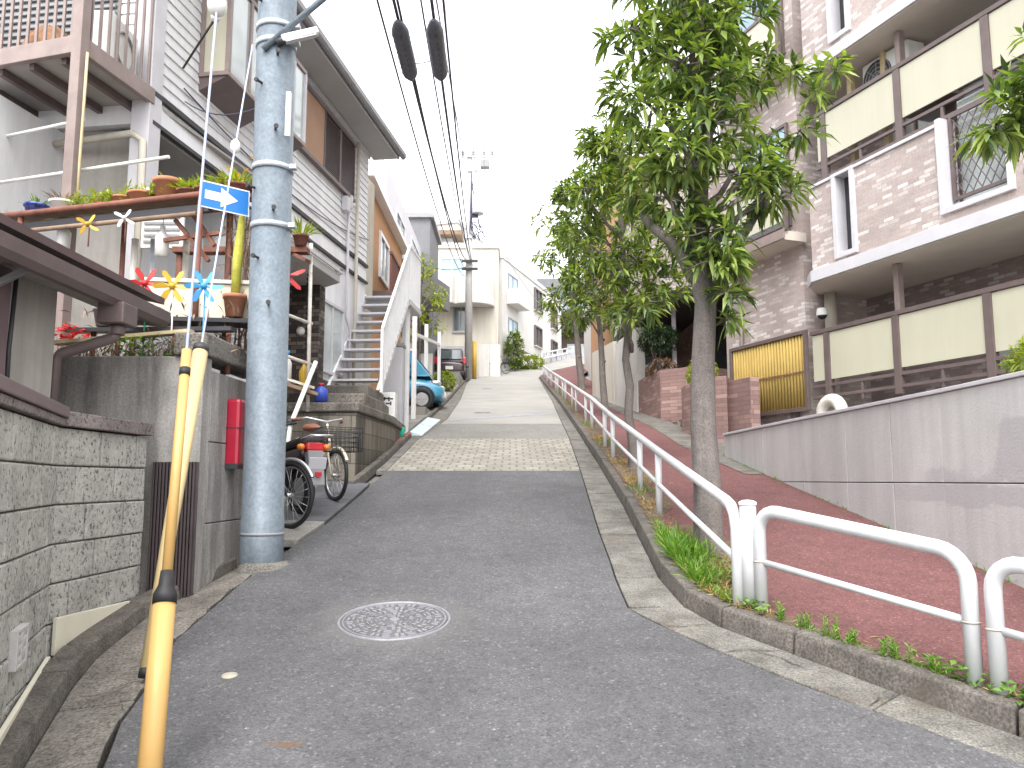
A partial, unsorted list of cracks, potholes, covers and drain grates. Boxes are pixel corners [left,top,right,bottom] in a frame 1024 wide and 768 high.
manhole cover [337,601,451,641]
